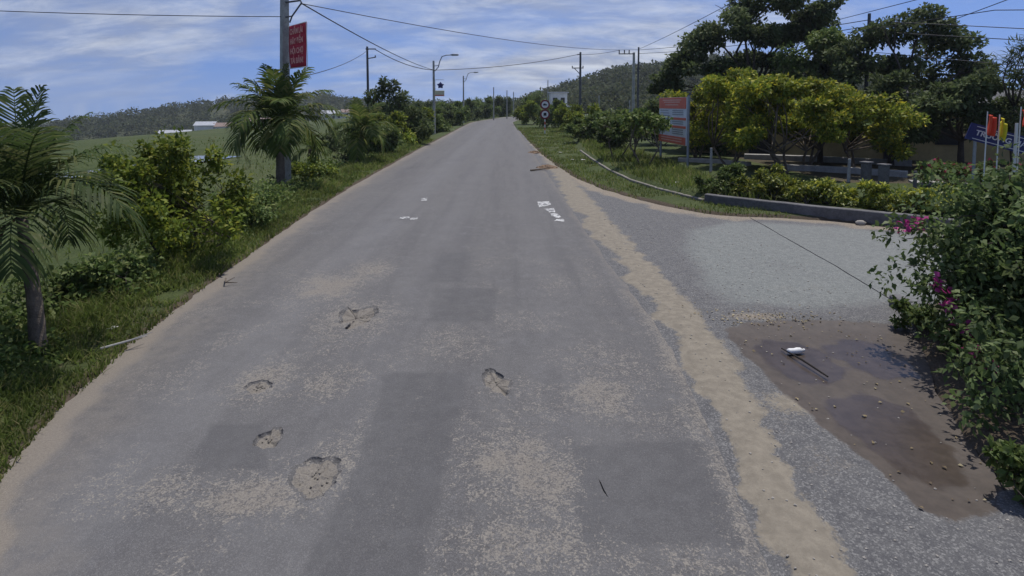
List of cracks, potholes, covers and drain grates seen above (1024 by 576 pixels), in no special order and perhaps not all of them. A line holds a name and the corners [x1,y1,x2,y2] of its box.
pothole [287,456,342,501]
pothole [338,305,379,329]
pothole [481,368,513,396]
pothole [243,379,273,394]
pothole [252,427,283,449]
